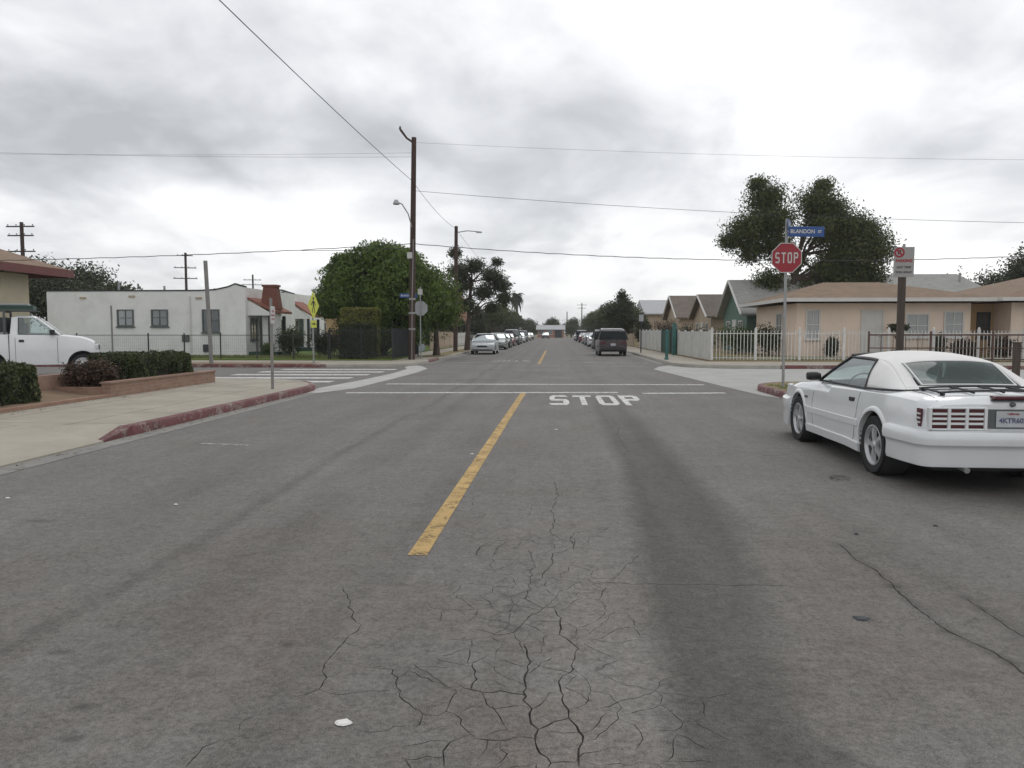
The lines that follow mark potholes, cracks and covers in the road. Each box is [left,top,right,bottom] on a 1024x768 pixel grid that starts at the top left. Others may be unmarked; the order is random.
crack [290,482,736,768]
crack [839,544,1024,674]
